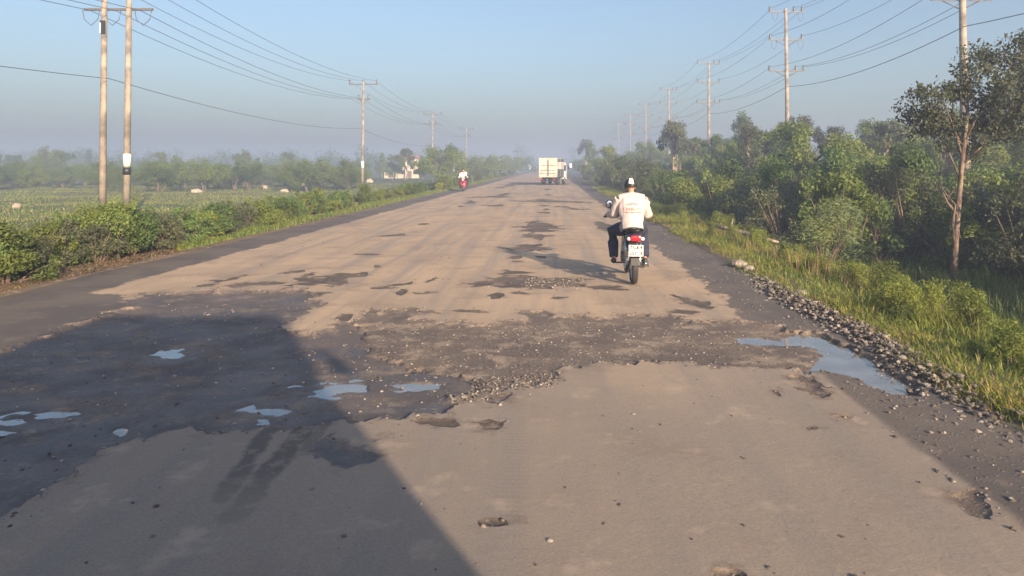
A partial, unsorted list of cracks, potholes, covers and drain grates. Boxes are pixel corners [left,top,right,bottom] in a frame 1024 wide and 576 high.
pothole [462,274,629,291]
pothole [354,307,821,404]
pothole [780,329,922,398]
pothole [711,566,747,576]
pothole [477,517,509,527]
pothole [947,488,993,520]
pothole [472,419,507,430]
pothole [512,220,565,234]
